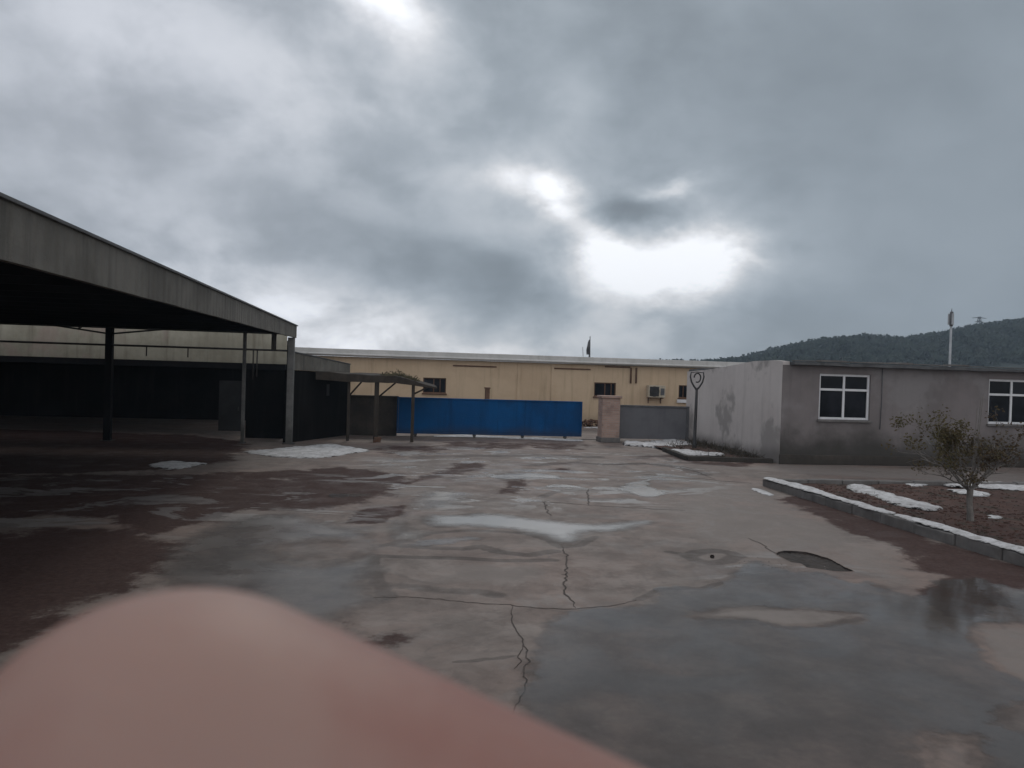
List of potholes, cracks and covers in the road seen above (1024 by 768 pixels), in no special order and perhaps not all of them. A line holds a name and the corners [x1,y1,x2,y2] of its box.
crack [373,548,636,710]
crack [536,489,667,515]
pothole [774,550,855,572]
